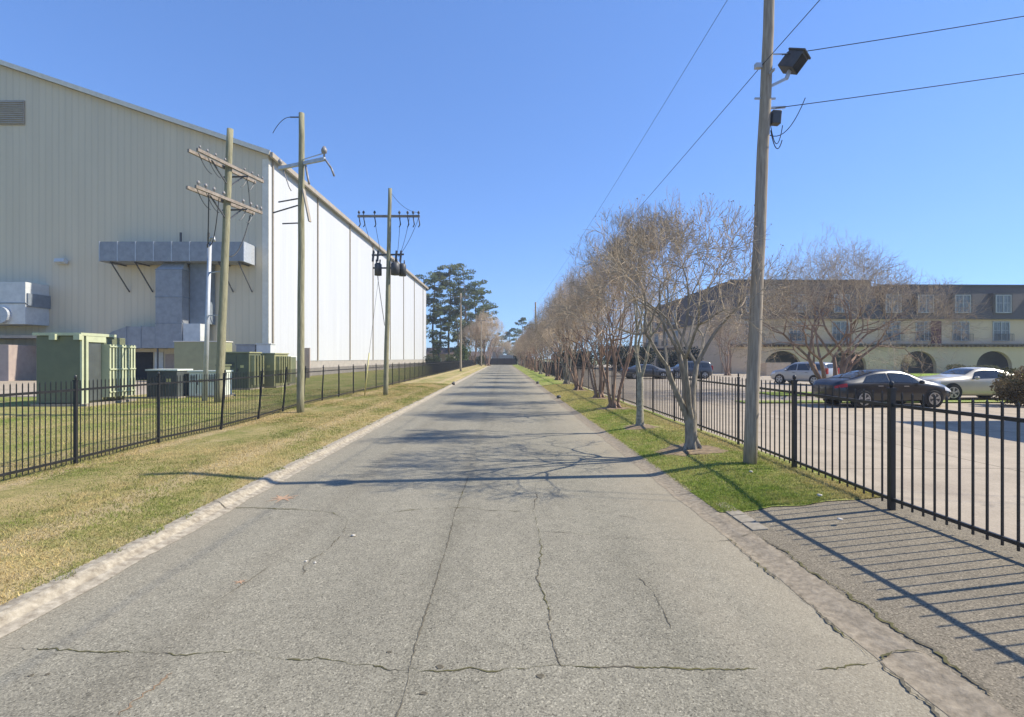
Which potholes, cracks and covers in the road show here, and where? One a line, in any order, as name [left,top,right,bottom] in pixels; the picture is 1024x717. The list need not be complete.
crack [2,647,399,670]
crack [375,477,940,717]
crack [207,507,348,607]
